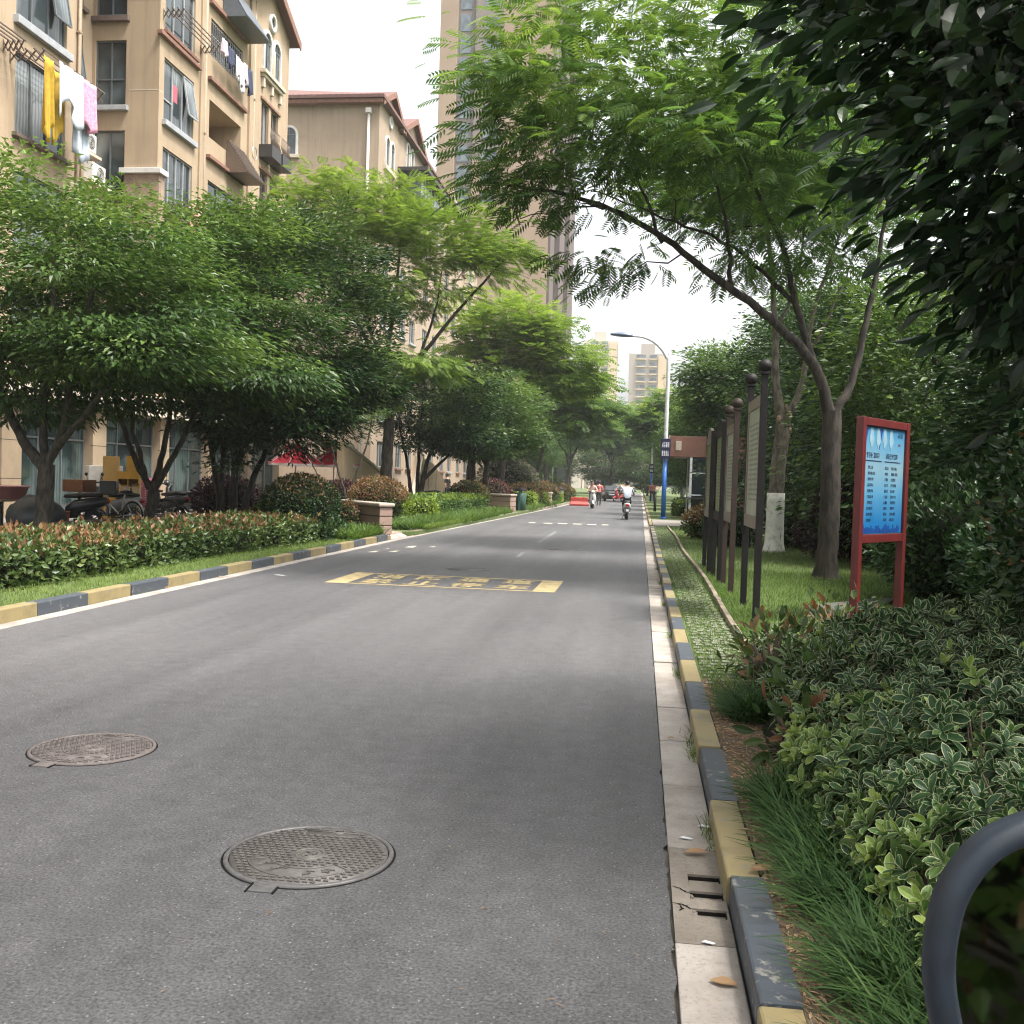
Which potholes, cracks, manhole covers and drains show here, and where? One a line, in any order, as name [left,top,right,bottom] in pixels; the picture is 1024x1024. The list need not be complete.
manhole cover [220,825,396,895]
manhole cover [25,733,158,768]
